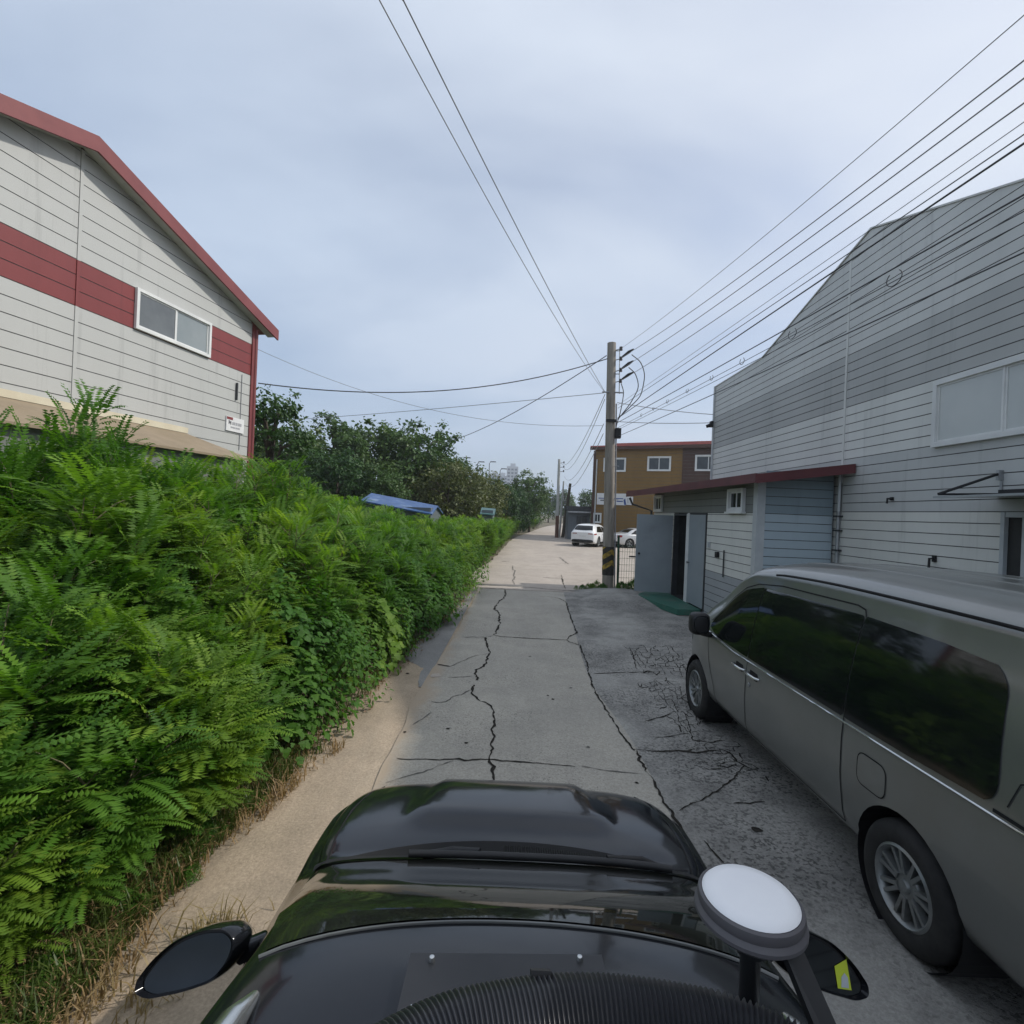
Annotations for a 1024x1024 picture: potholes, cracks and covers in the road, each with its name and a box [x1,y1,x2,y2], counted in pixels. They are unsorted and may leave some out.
crack [625,645,769,811]
crack [389,558,632,782]
